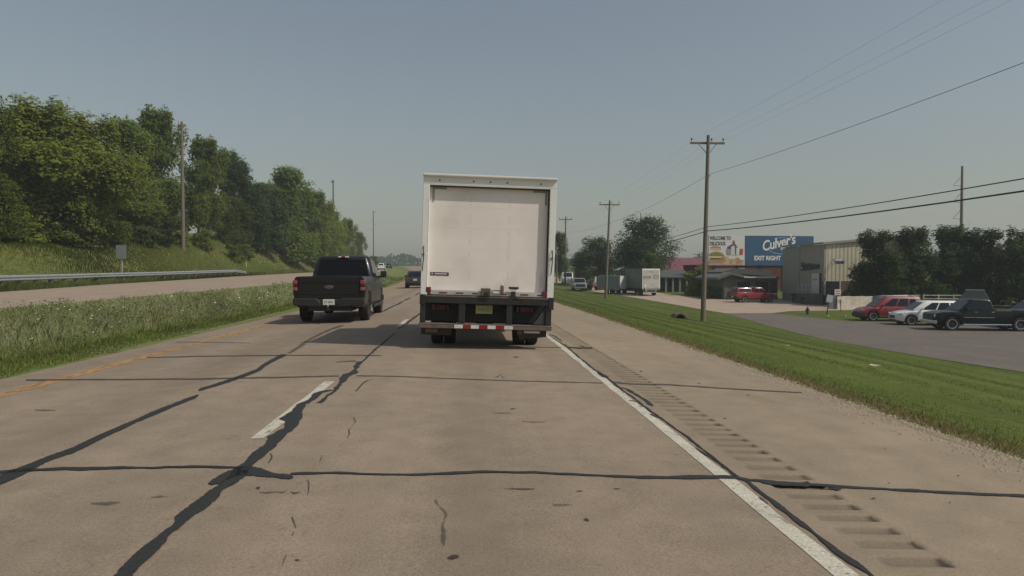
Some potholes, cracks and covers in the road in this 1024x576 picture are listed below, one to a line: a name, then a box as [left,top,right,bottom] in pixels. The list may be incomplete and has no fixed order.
crack [435,499,448,545]
